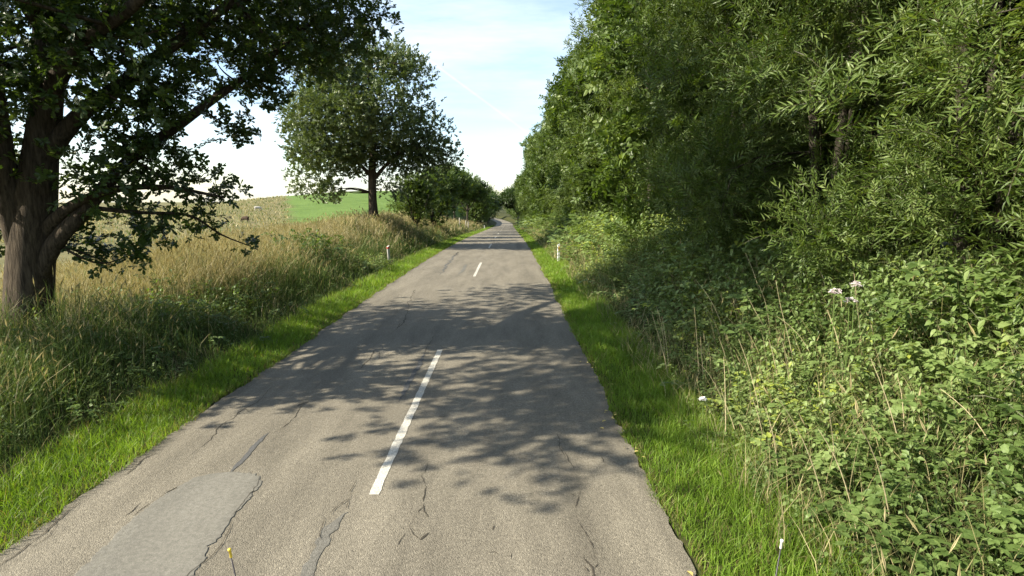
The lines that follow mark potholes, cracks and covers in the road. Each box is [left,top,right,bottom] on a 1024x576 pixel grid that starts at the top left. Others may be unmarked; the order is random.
crack [580,524,599,576]
crack [187,480,259,575]
crack [398,467,428,544]
